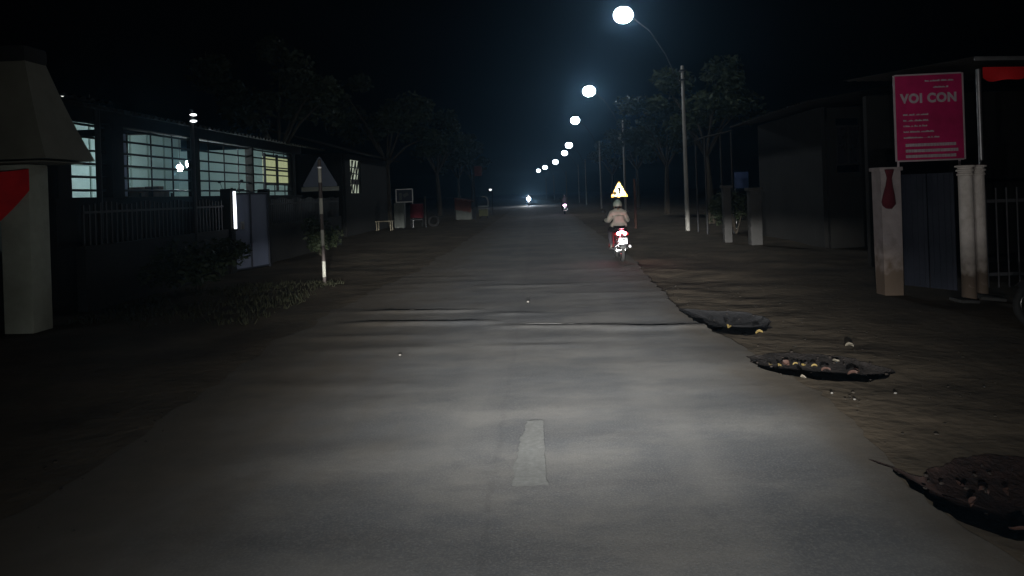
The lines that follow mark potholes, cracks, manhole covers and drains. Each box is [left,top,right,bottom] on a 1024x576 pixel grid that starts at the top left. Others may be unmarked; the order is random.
pothole [747,351,895,382]
pothole [679,308,773,336]
pothole [869,454,1024,541]
